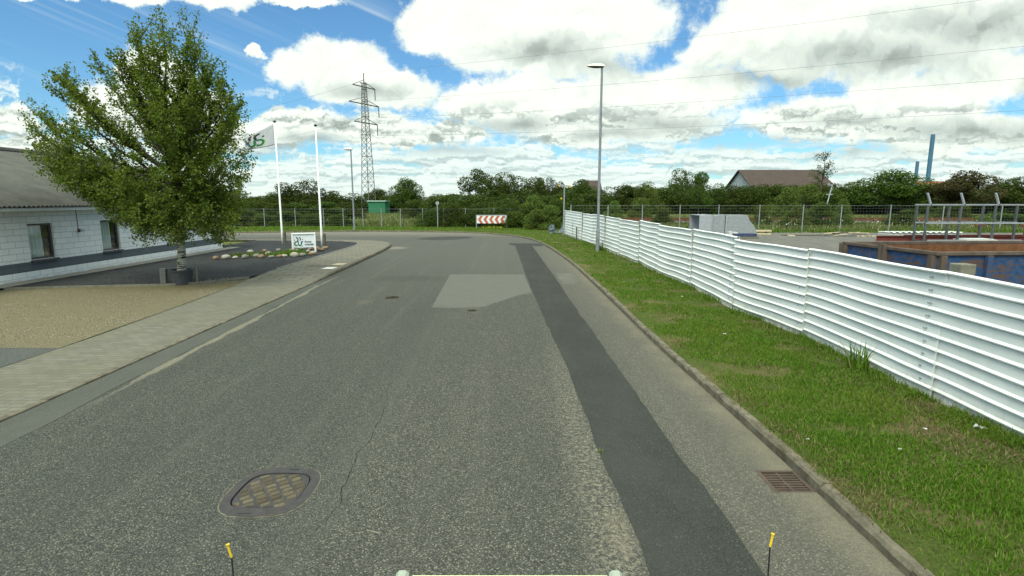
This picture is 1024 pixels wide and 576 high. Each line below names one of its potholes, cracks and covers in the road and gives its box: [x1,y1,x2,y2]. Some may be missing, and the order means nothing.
manhole cover [217,467,321,518]
drain grate [755,470,816,492]
